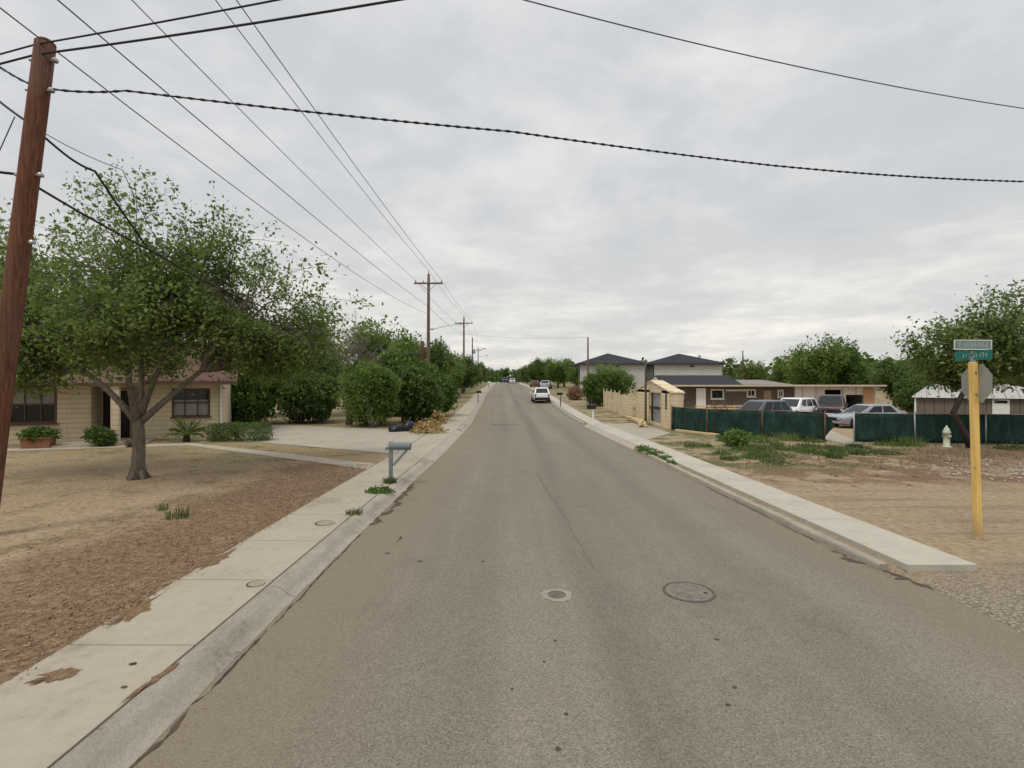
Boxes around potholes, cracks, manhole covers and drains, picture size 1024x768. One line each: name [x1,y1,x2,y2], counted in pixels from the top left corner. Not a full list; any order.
manhole cover [662,581,716,603]
manhole cover [541,589,572,602]
